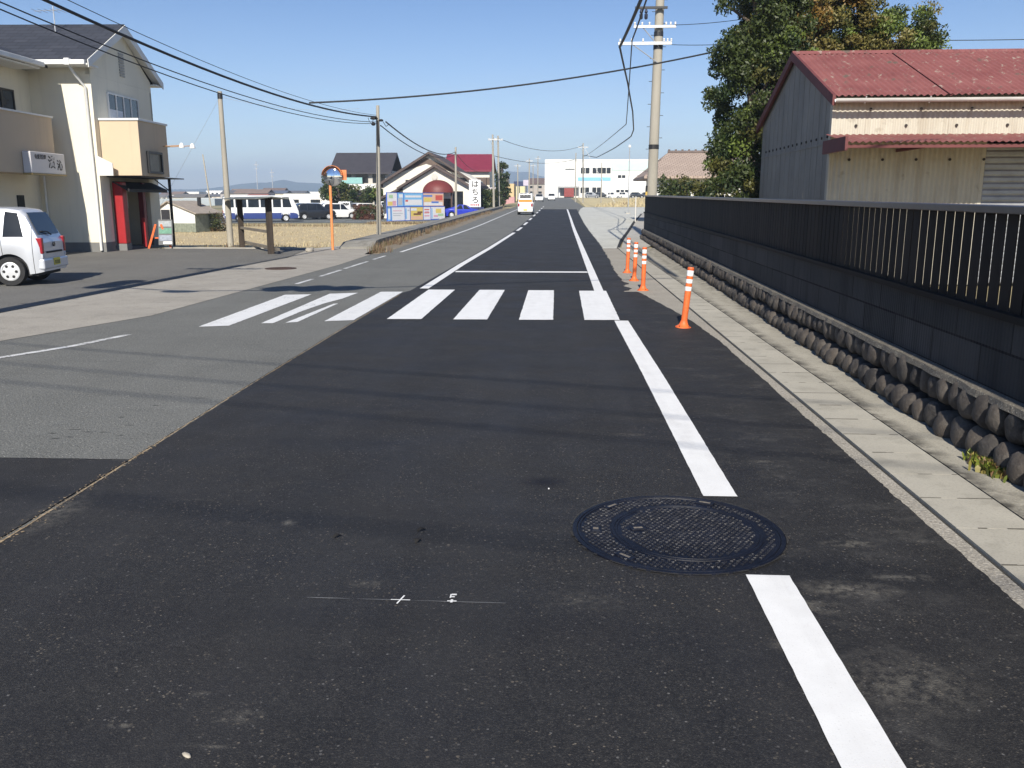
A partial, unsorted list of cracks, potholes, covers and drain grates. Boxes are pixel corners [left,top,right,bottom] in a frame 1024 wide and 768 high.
manhole cover [570,495,789,576]
